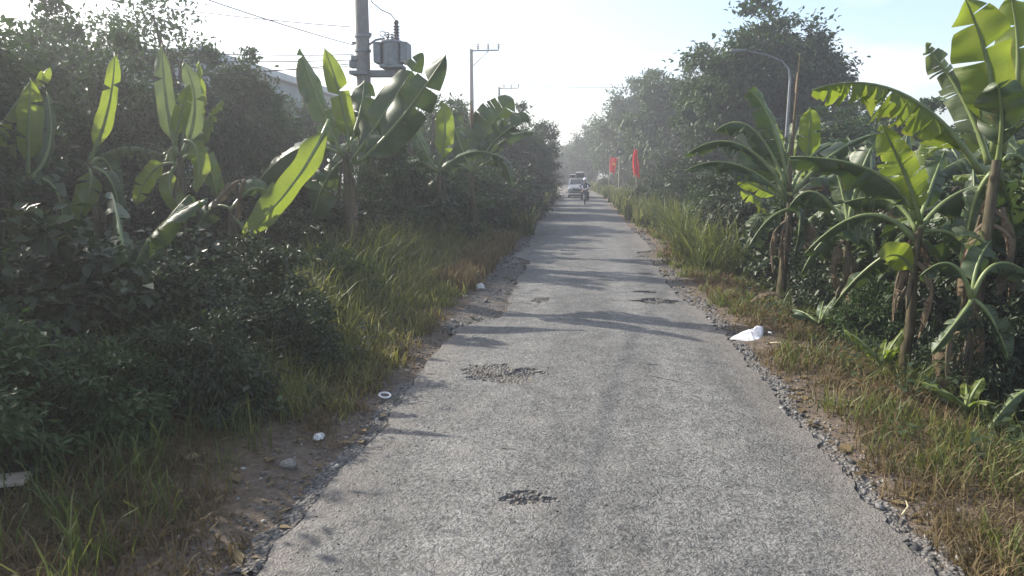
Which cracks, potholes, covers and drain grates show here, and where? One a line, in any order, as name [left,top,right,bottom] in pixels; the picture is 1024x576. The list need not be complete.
pothole [460,363,550,384]
pothole [498,490,562,505]
